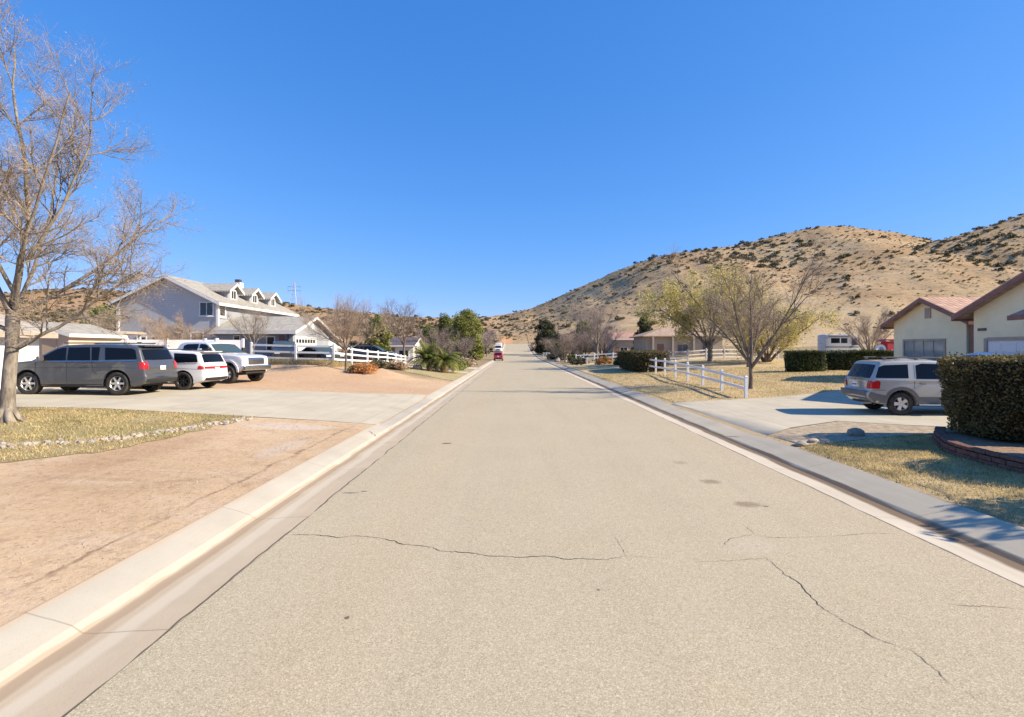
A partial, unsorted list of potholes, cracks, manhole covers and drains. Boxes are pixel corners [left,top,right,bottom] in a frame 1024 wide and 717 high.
crack [767,559,982,704]
crack [294,534,759,562]
